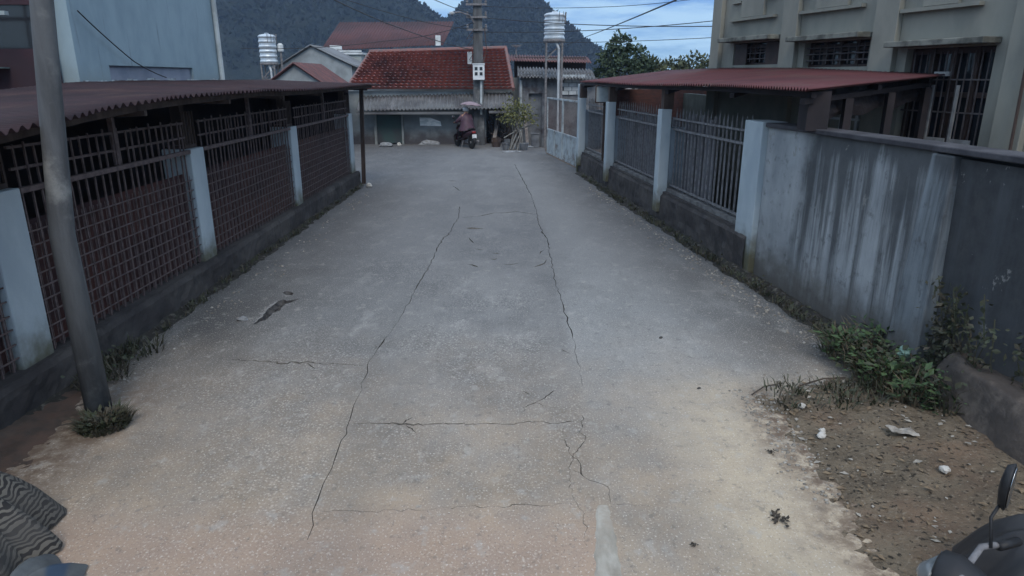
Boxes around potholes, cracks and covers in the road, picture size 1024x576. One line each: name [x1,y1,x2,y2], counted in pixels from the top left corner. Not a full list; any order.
crack [323,416,676,539]
crack [231,359,354,369]
crack [462,212,530,267]
pothole [253,299,298,325]
